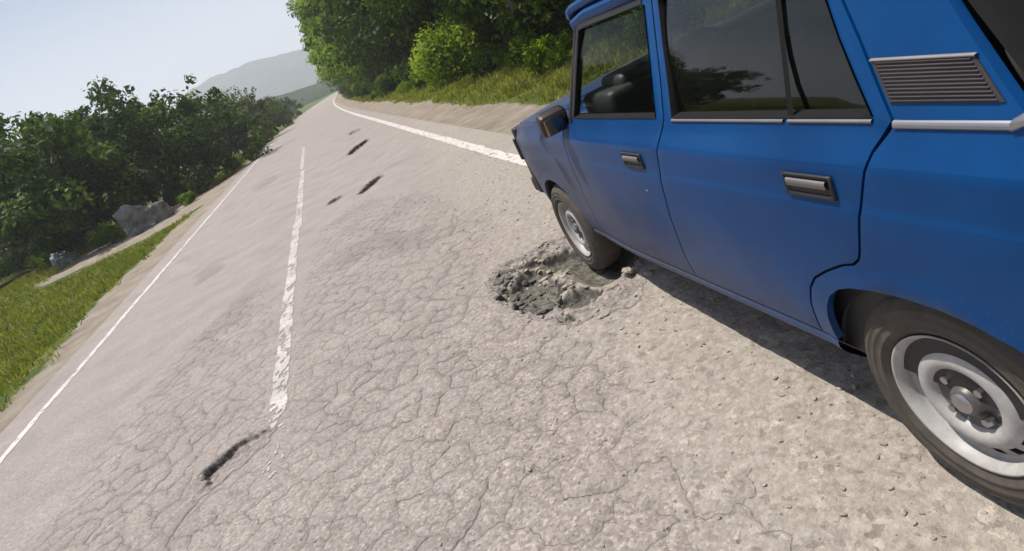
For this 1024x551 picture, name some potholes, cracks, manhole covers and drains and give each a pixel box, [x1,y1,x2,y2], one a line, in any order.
pothole [356,174,384,195]
crack [38,281,281,551]
crack [215,414,792,551]
pothole [484,235,653,326]
pothole [347,138,370,155]
crack [275,196,639,551]
